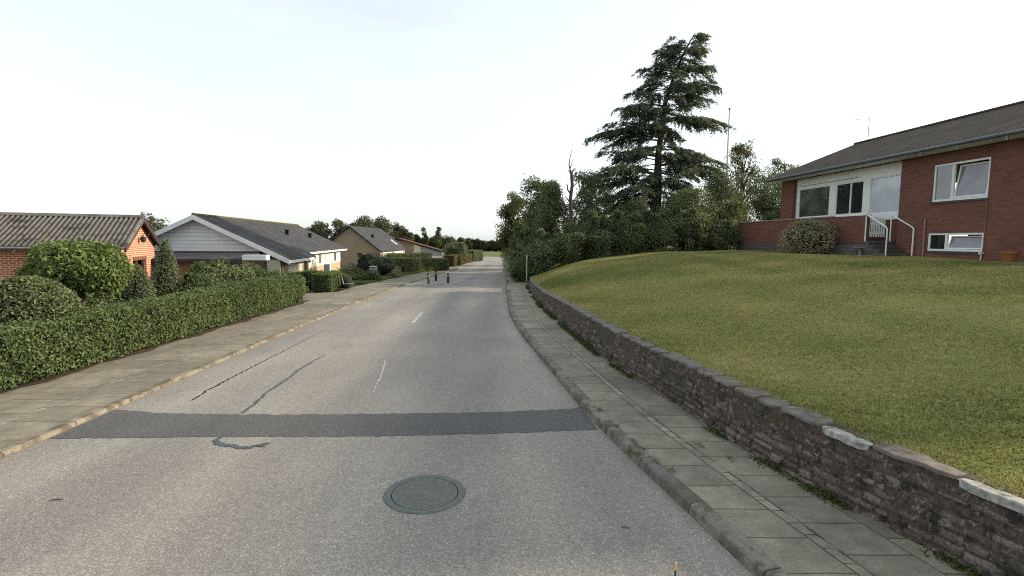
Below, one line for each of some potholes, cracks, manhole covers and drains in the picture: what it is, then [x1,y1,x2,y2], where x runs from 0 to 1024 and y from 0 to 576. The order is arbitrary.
manhole cover [384,475,465,514]
